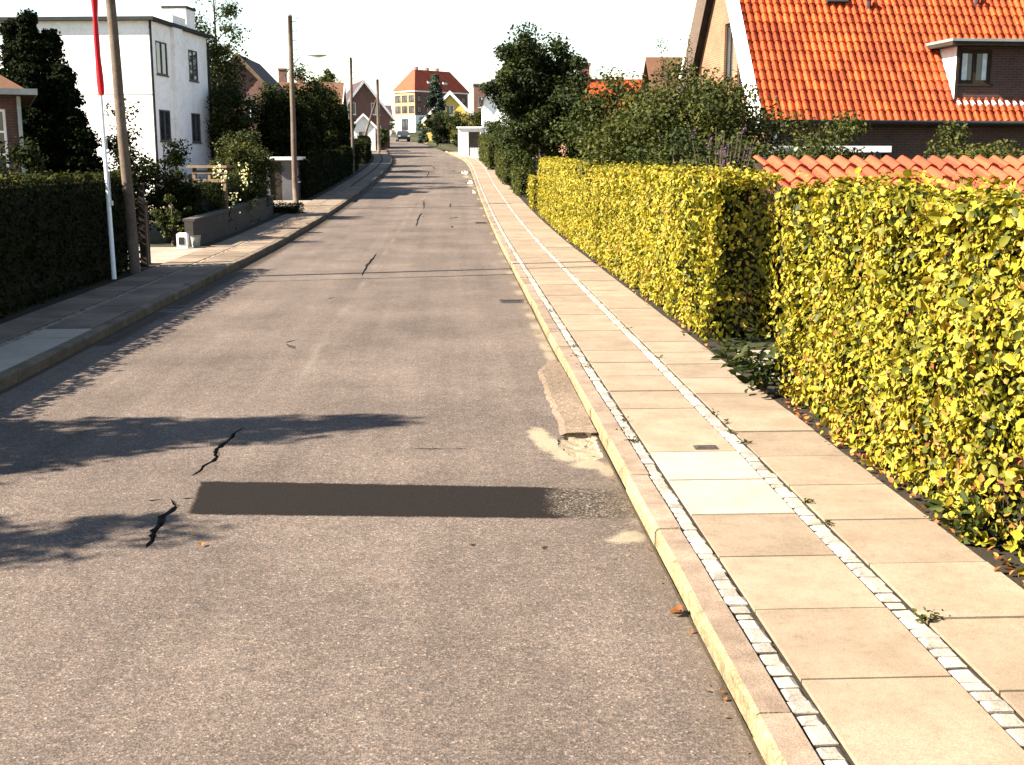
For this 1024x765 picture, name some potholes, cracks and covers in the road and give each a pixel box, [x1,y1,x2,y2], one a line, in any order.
crack [362,254,376,276]
crack [146,498,193,548]
pothole [557,435,603,462]
crack [192,428,243,476]
